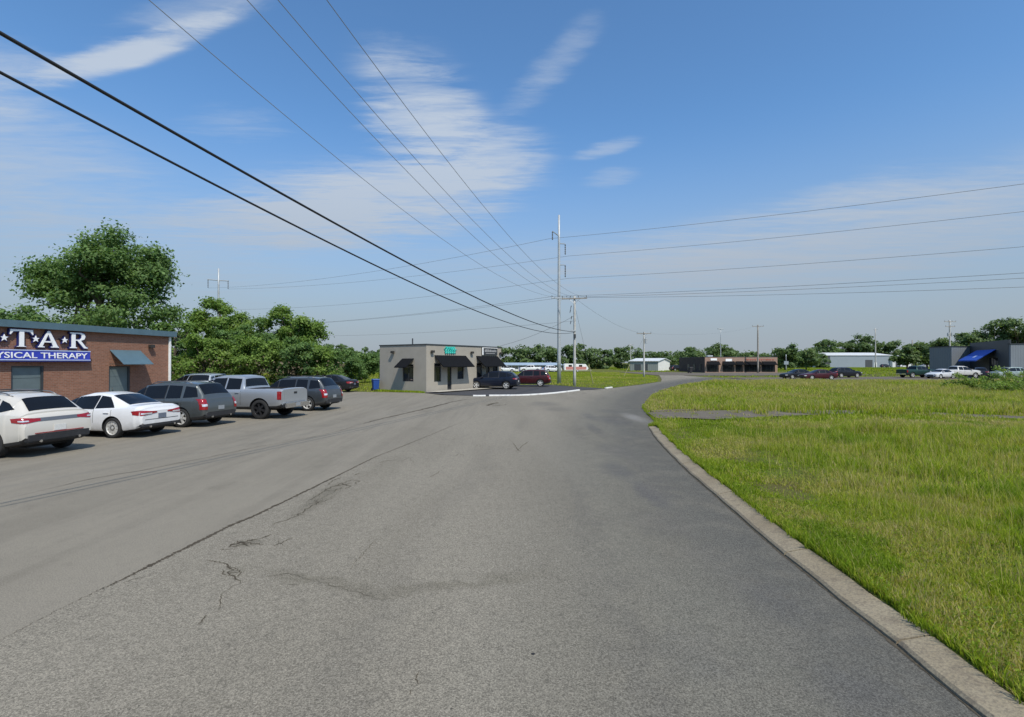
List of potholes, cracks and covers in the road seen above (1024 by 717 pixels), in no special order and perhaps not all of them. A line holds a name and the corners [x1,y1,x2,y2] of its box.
crack [274,473,359,524]
crack [198,535,291,624]
